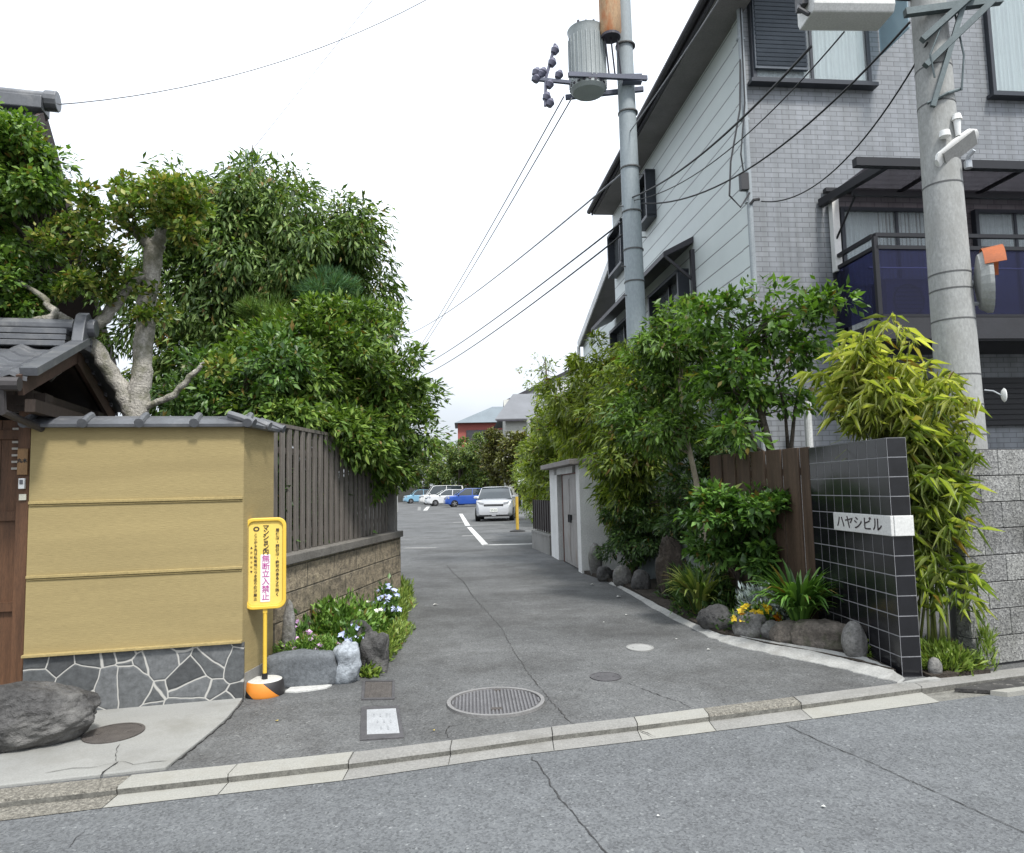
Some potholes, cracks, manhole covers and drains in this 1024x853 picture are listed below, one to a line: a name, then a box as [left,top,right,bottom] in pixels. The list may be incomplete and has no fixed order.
manhole cover [361,680,395,701]
manhole cover [81,722,145,744]
crack [787,725,1024,832]
manhole cover [590,672,621,682]
manhole cover [360,705,404,741]
crack [531,758,608,853]
manhole cover [626,643,654,652]
